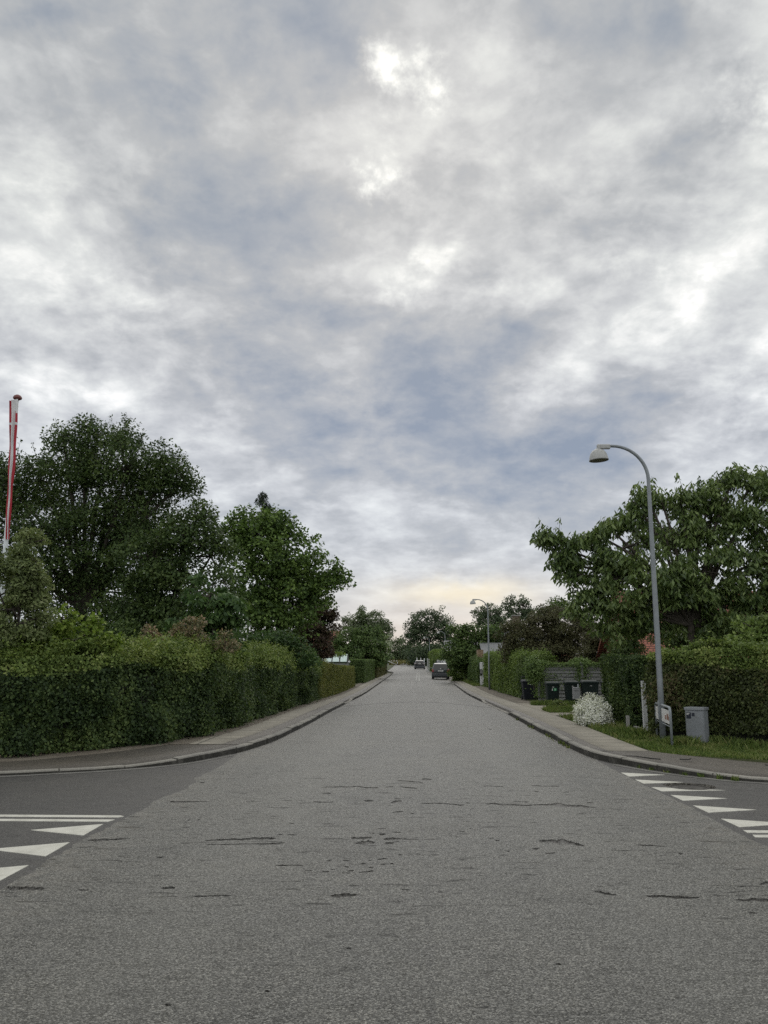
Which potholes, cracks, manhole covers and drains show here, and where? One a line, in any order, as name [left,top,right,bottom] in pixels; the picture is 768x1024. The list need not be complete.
crack [735,898,768,913]
crack [314,778,597,809]
crack [205,823,296,845]
